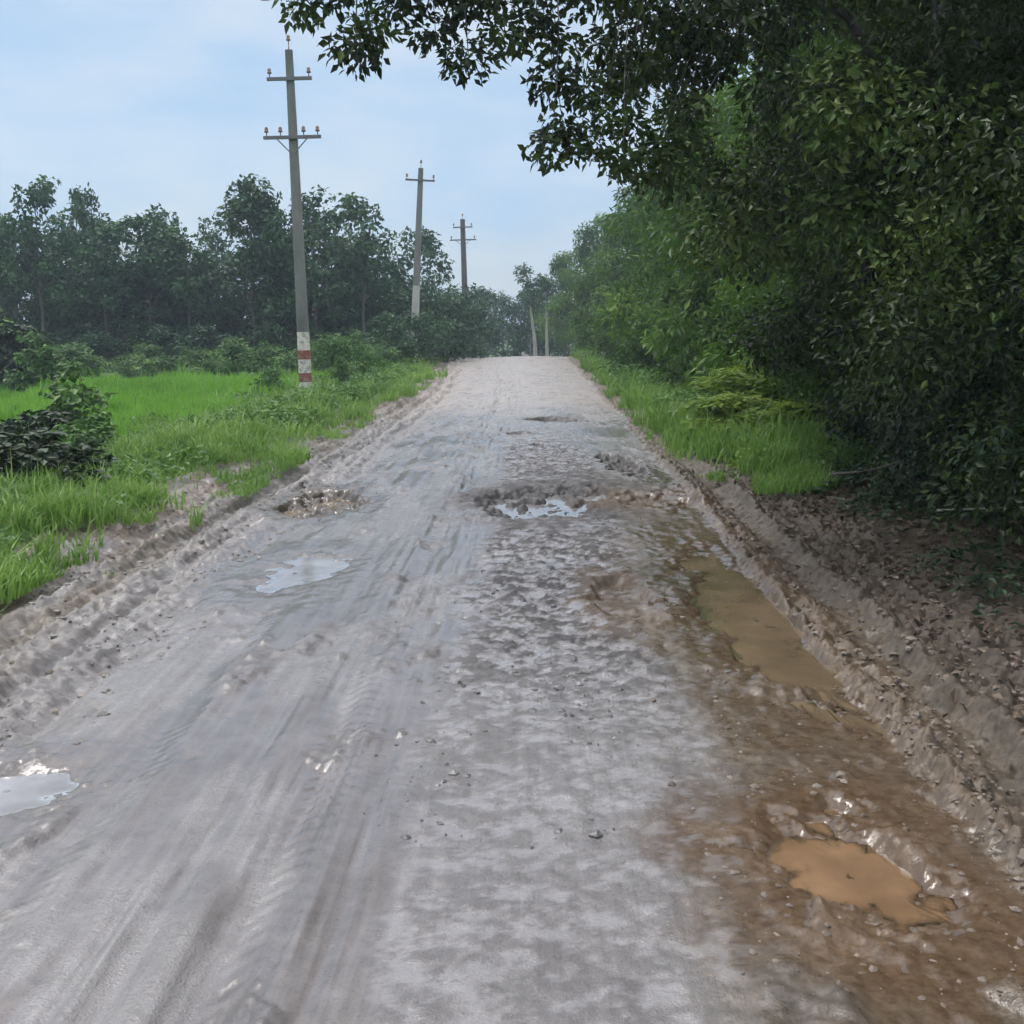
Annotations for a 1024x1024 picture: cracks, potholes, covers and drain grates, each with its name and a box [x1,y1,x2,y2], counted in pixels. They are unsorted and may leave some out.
pothole [0,746,118,828]
pothole [694,783,1024,977]
pothole [590,451,652,477]
pothole [456,480,634,521]
pothole [255,483,377,520]
pothole [209,545,383,603]
pothole [521,415,587,423]
